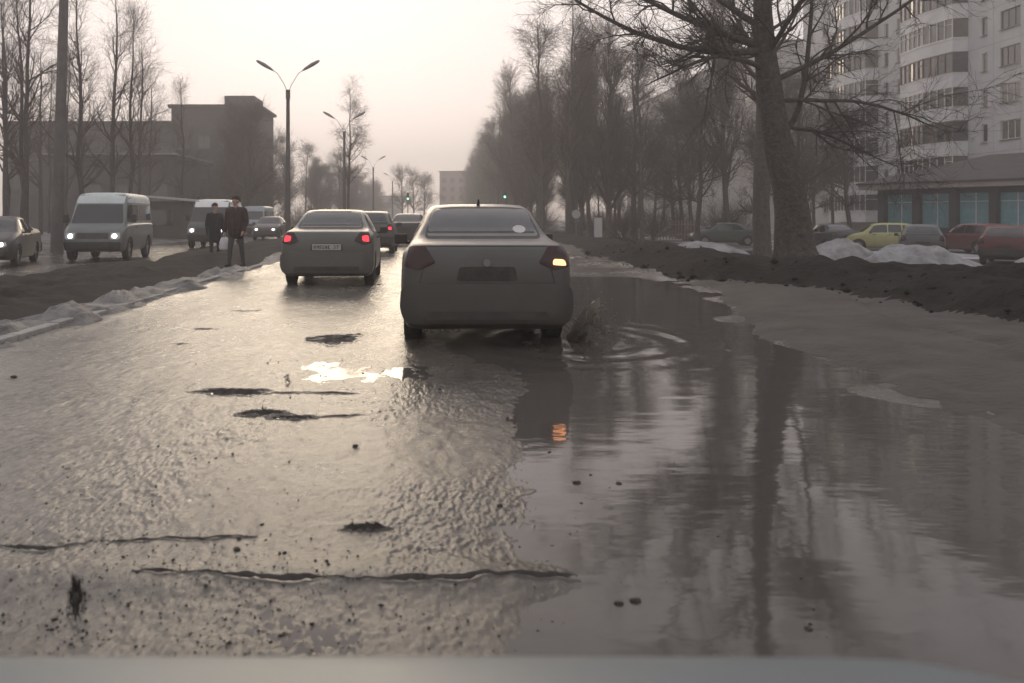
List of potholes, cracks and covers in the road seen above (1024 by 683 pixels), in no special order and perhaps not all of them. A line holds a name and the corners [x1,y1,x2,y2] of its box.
pothole [185,388,273,396]
pothole [67,571,84,633]
pothole [339,521,394,532]
pothole [233,408,294,417]
pothole [299,333,363,347]
crack [131,567,582,585]
crack [0,534,256,554]
